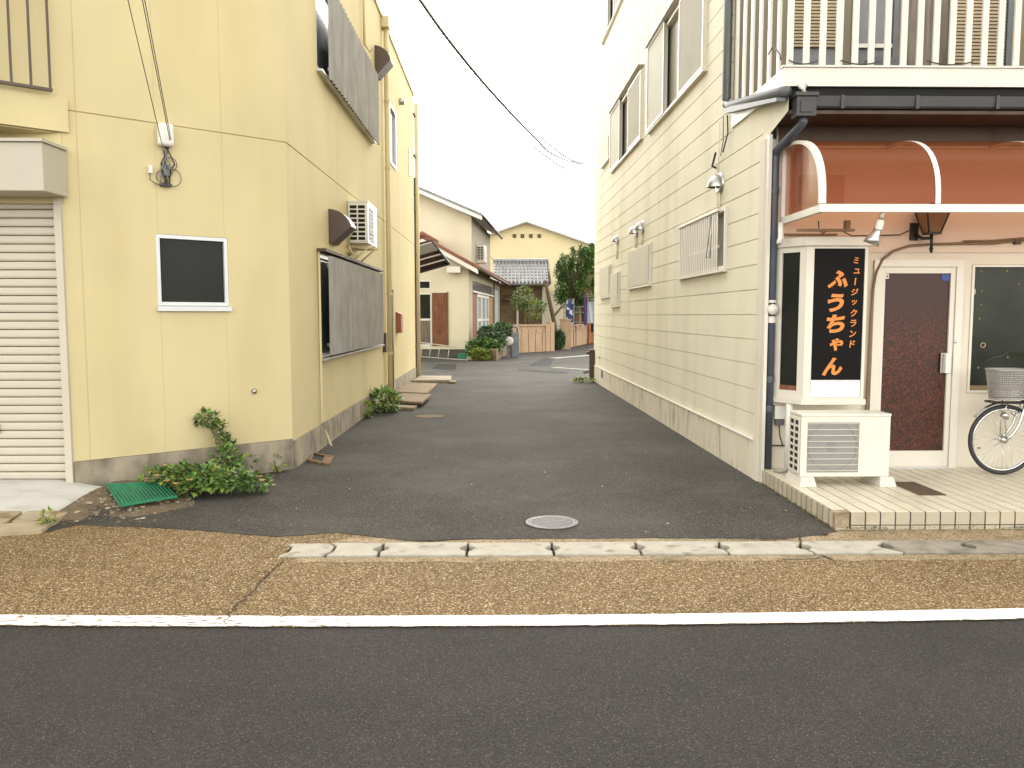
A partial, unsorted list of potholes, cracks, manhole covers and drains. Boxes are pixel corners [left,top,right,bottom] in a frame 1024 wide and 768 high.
crack [220,556,288,629]
manhole cover [526,515,578,530]
